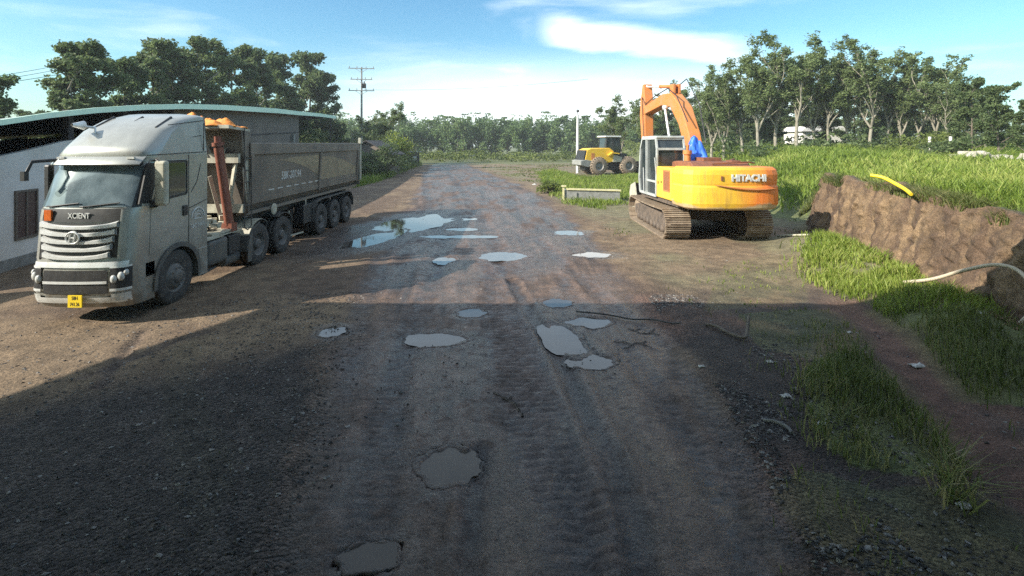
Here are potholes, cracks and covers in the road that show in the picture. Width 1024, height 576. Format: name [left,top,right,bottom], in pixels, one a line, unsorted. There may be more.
pothole [431,255,460,266]
pothole [363,213,464,234]
pothole [474,251,535,263]
pothole [455,307,489,318]
pothole [333,540,403,576]
pothole [314,325,348,338]
pothole [538,298,574,308]
pothole [411,442,484,489]
pothole [561,353,621,371]
pothole [534,316,594,361]
pothole [562,316,615,330]
